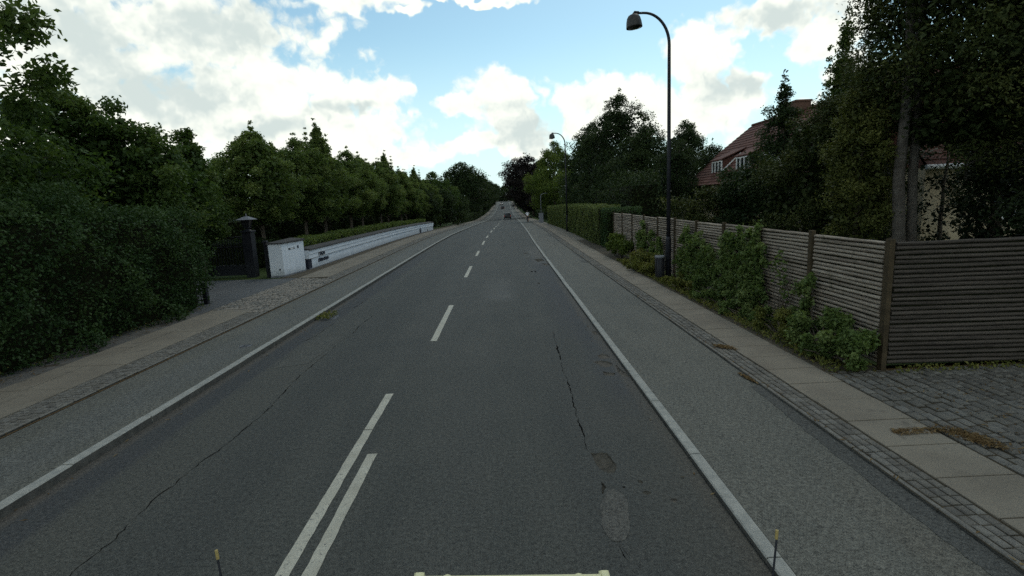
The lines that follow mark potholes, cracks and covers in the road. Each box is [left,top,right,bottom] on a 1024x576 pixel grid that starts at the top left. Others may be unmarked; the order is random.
crack [553,334,587,449]
crack [69,298,372,576]
